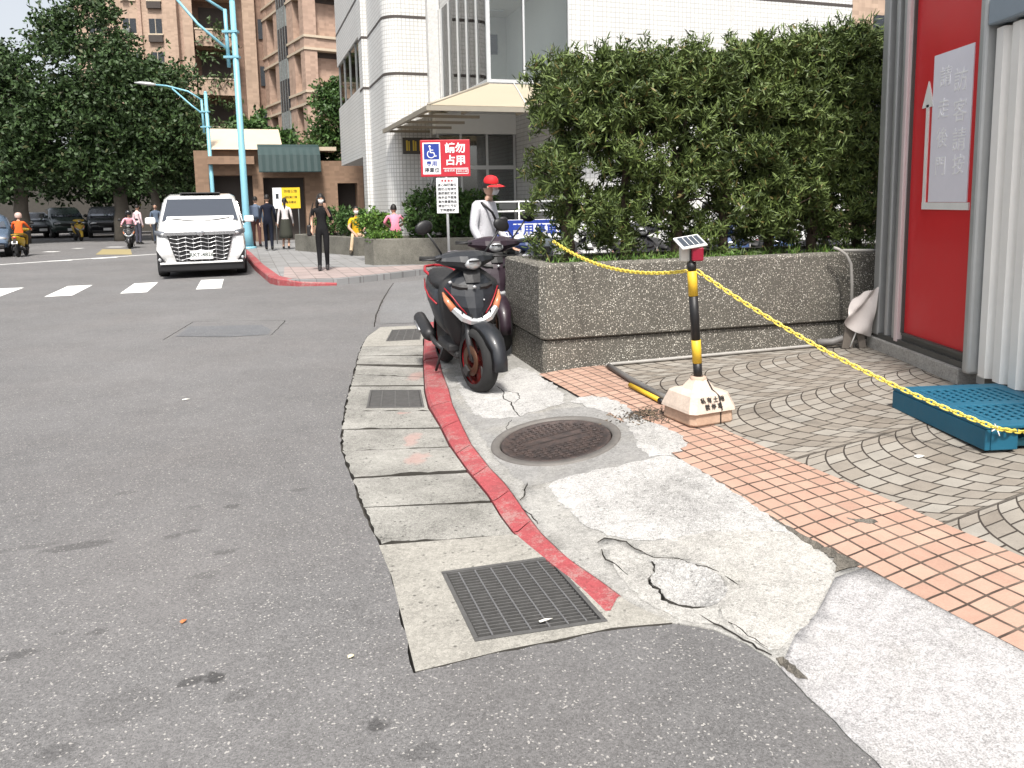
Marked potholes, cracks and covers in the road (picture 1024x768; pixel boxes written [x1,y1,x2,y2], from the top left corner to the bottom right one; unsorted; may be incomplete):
drain grate [386,329,421,341]
manhole cover [491,416,621,466]
drain grate [366,390,424,408]
pothole [648,559,728,609]
drain grate [441,557,607,642]
crack [497,386,520,429]
crack [597,537,738,585]
